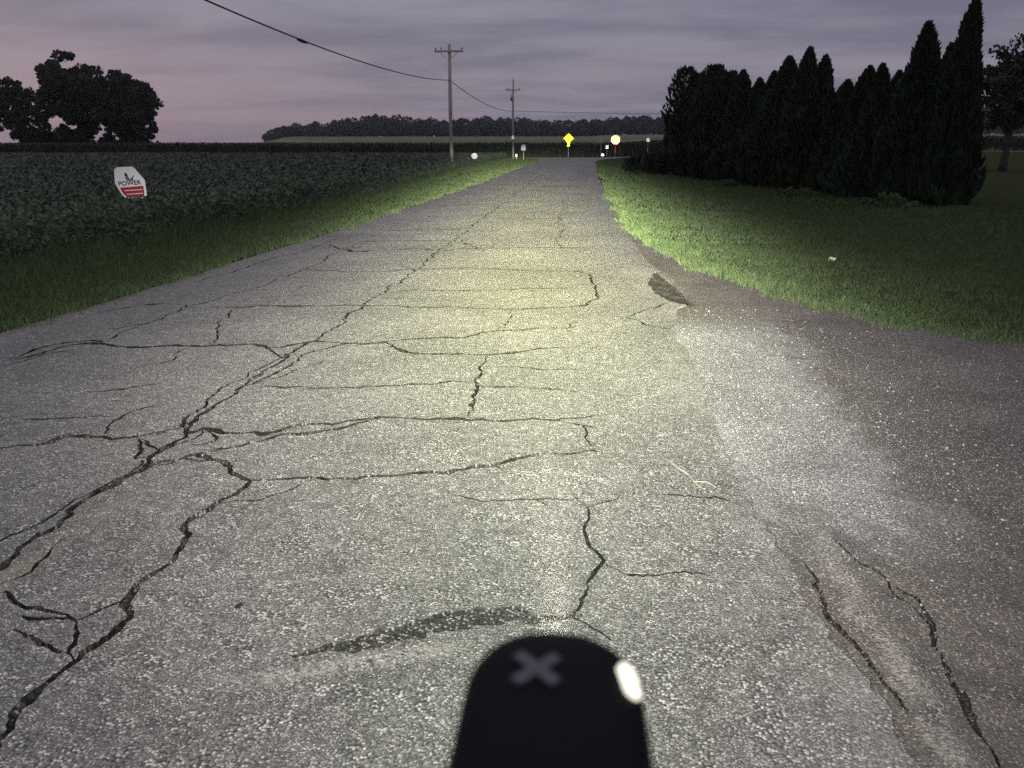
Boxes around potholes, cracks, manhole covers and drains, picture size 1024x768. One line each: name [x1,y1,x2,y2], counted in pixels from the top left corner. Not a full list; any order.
crack [803,537,1002,768]
crack [0,200,709,748]
crack [646,494,744,507]
pothole [647,271,687,304]
